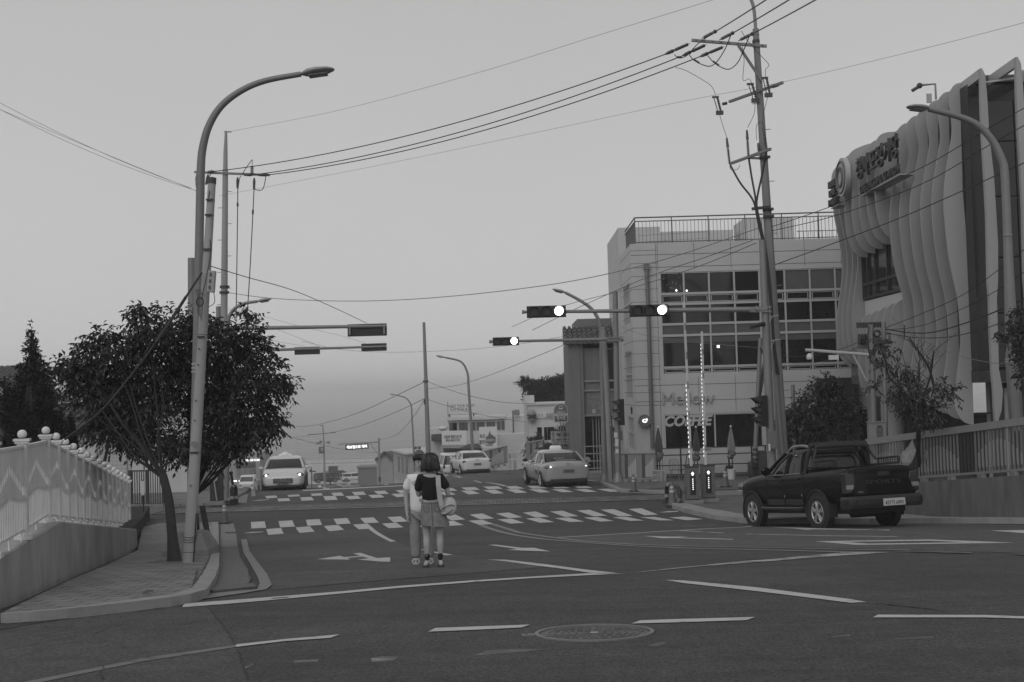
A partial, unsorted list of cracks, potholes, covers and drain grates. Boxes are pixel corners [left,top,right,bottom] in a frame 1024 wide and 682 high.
manhole cover [522,624,654,642]
